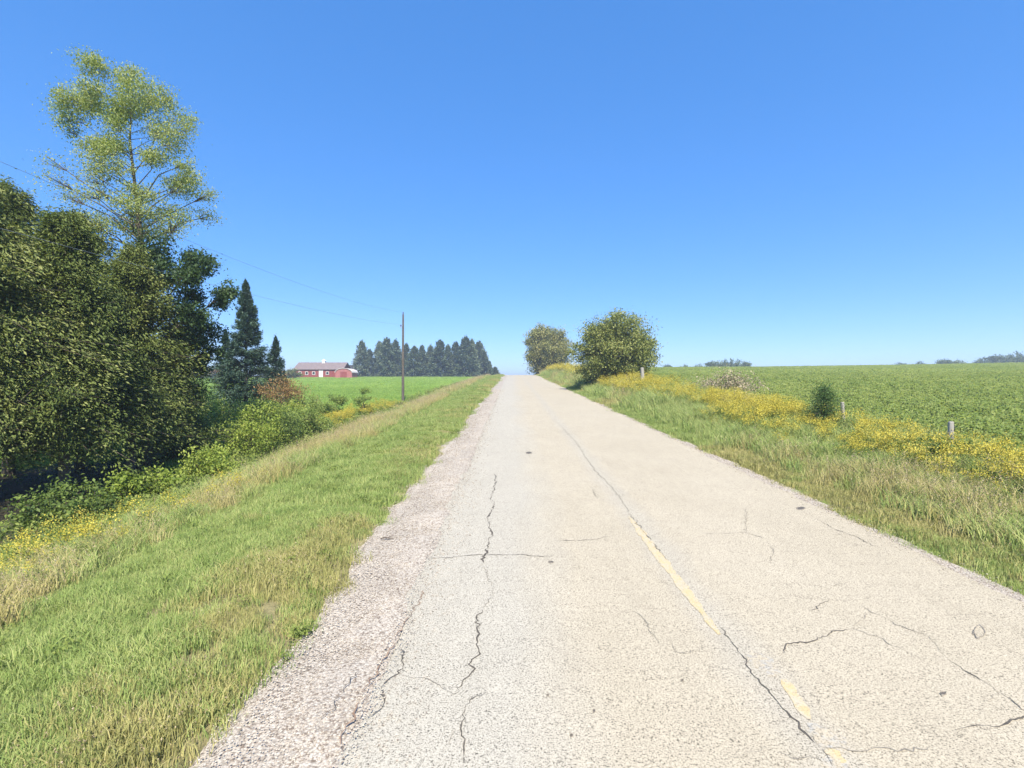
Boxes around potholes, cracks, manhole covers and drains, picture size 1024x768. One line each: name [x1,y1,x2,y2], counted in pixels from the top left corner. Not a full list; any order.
crack [367,475,608,759]
crack [723,629,930,764]
pothole [972,624,986,639]
crack [951,661,1024,735]
crack [783,604,942,660]
